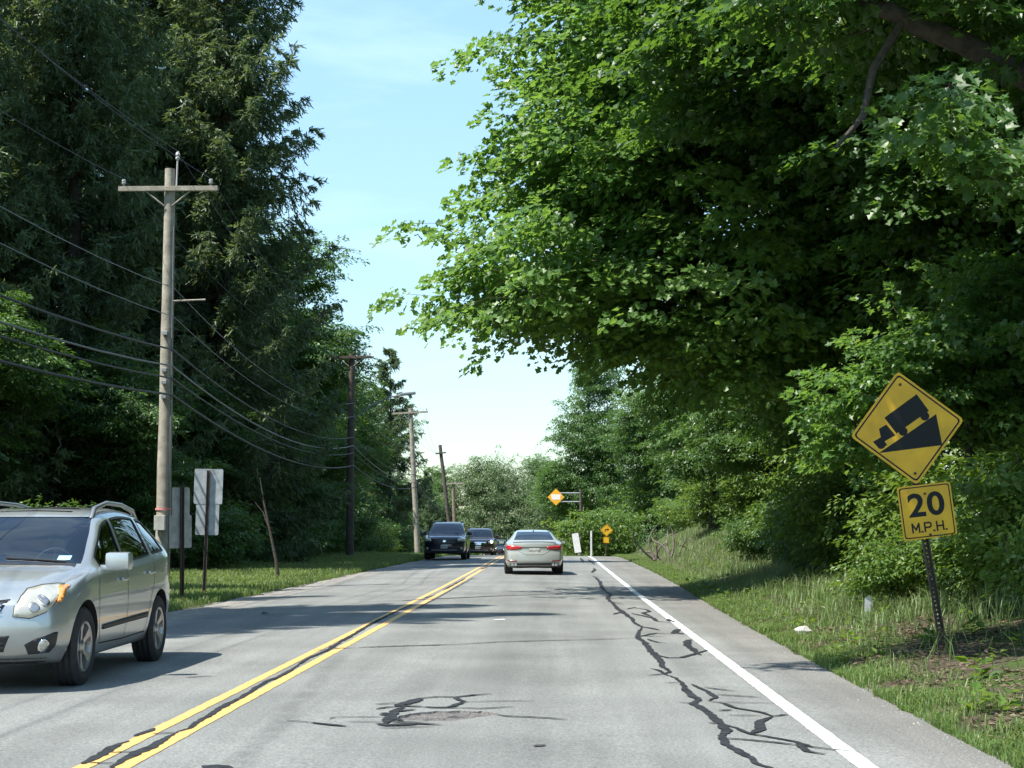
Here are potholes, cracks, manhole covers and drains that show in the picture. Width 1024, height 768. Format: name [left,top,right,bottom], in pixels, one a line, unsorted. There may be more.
pothole [398,710,497,721]
